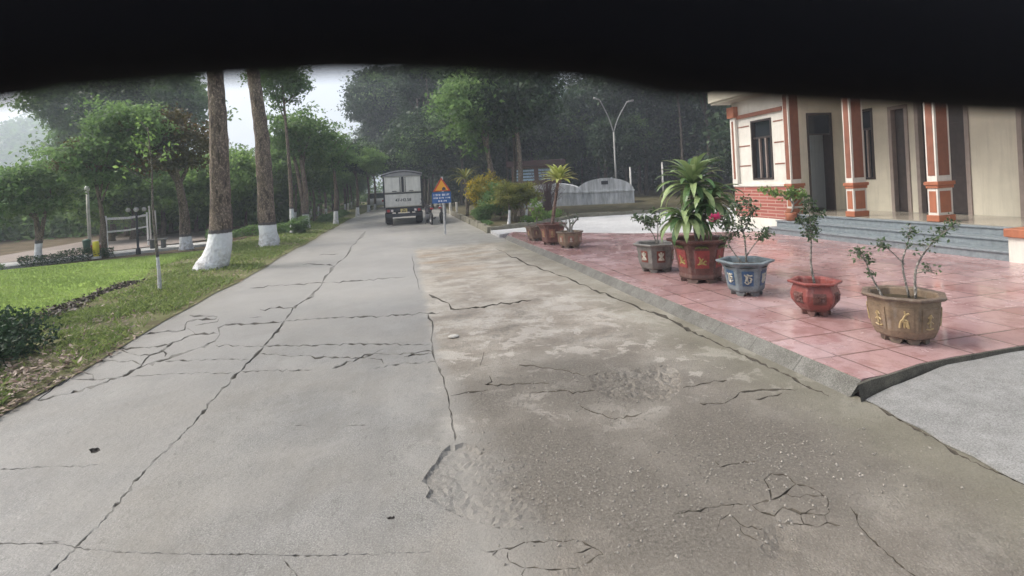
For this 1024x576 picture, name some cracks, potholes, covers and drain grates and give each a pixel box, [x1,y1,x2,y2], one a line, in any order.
crack [677,461,916,576]
crack [0,231,641,576]
crack [497,249,829,405]
pothole [422,443,565,531]
